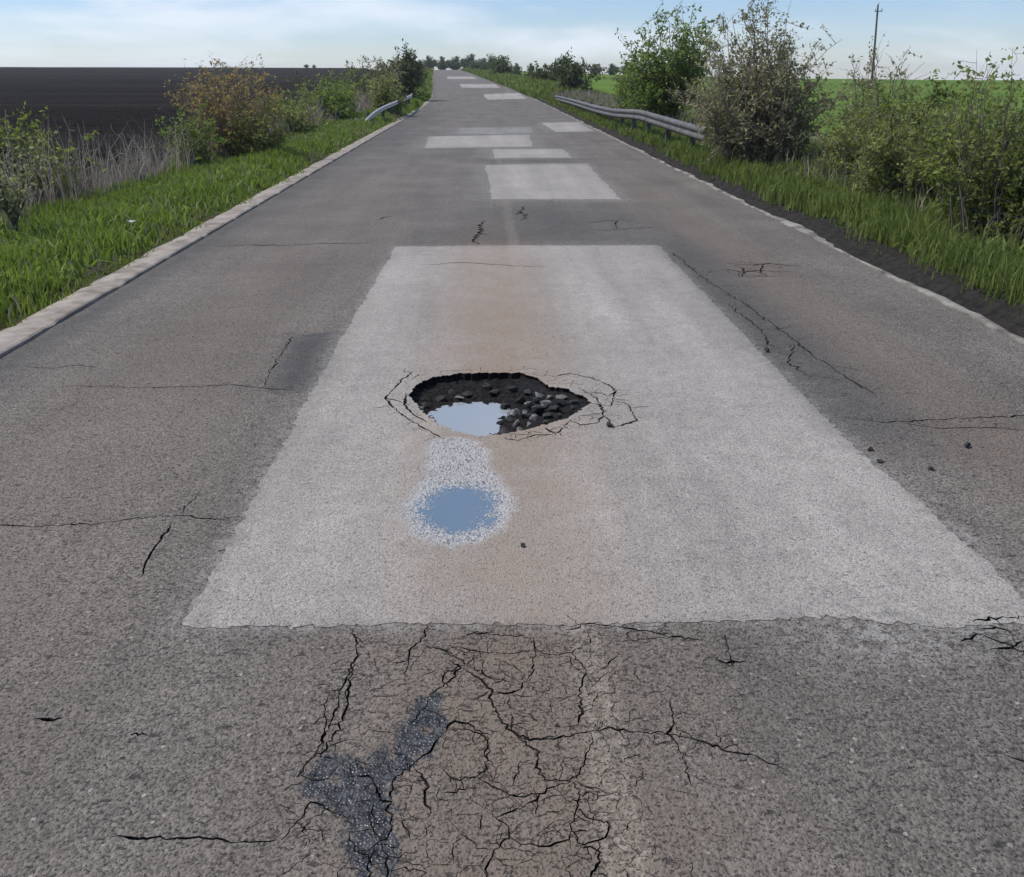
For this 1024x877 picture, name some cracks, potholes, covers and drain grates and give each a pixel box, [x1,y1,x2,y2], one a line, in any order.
crack [663,253,880,394]
crack [847,415,1024,430]
crack [960,616,1024,660]
crack [66,337,294,391]
pothole [409,372,591,434]
crack [472,221,487,244]
crack [112,614,785,877]
crack [0,489,233,581]
